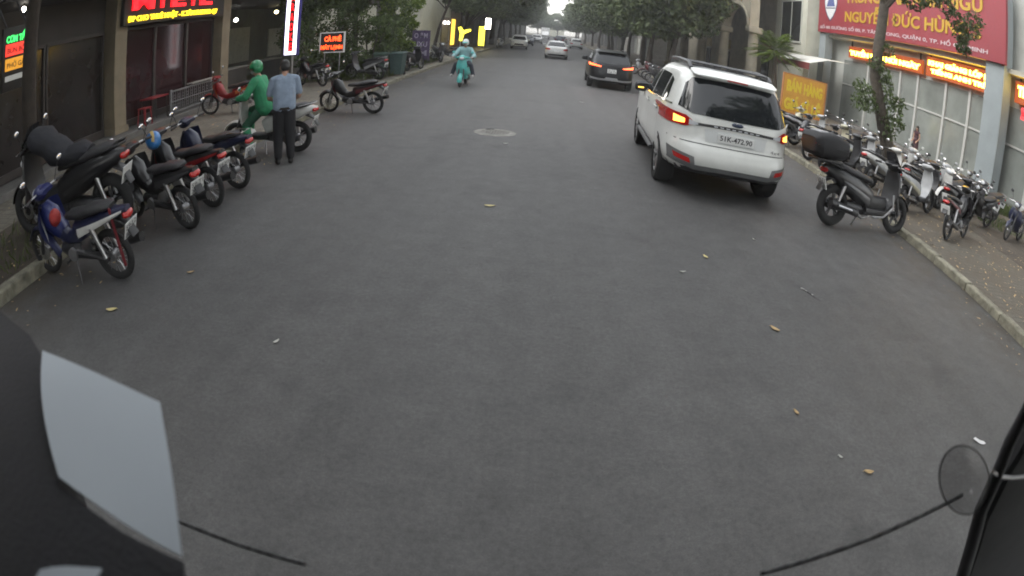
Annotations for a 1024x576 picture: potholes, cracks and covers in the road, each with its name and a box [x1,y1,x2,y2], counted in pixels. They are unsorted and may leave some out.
manhole cover [474,128,516,137]
